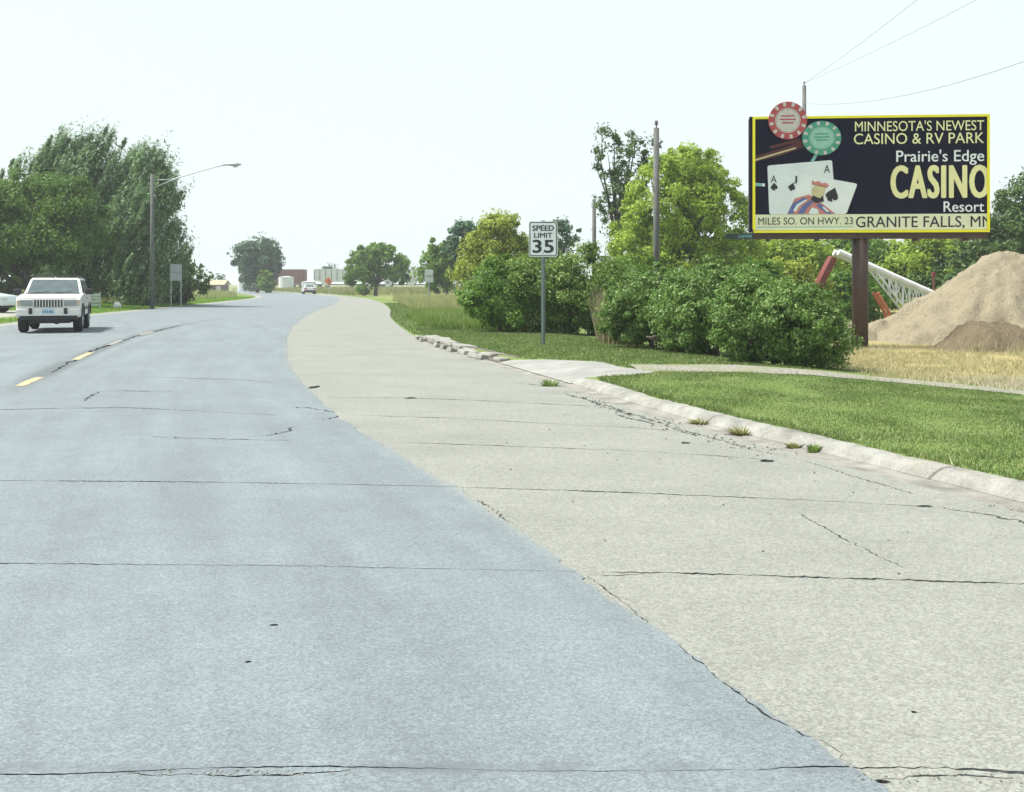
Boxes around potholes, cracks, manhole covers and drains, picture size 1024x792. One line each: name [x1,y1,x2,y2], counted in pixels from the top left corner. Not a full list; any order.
crack [135,766,1024,783]
crack [84,460,1024,584]
